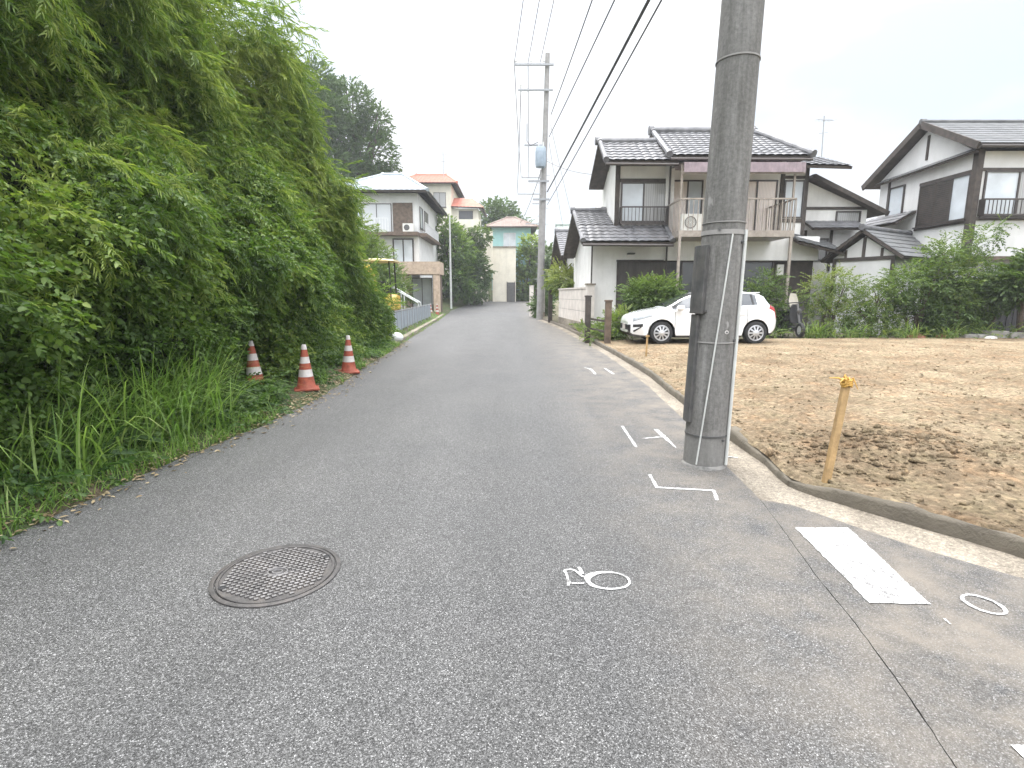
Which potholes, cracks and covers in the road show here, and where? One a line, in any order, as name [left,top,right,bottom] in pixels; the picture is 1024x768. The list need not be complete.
manhole cover [208,544,341,609]
